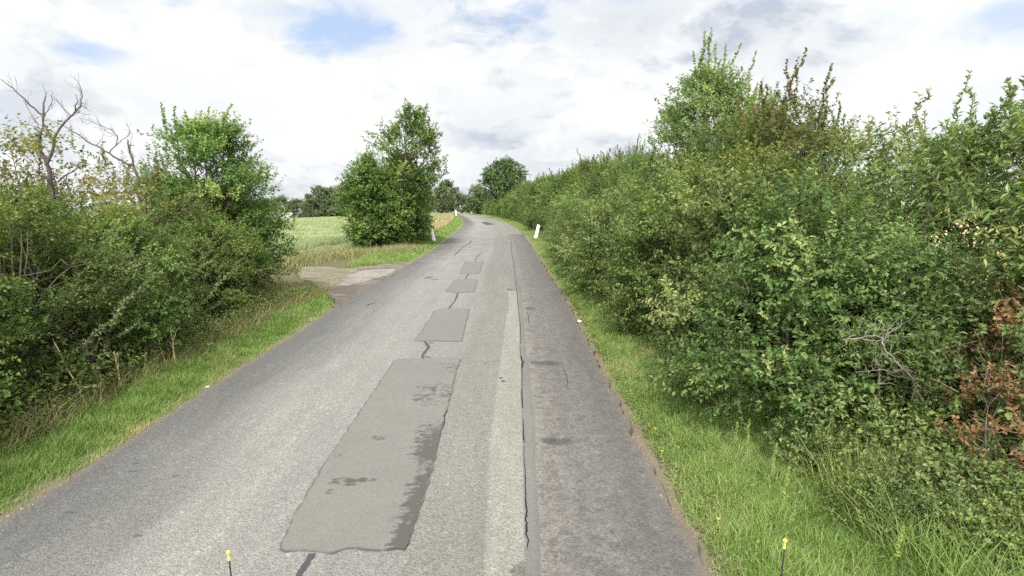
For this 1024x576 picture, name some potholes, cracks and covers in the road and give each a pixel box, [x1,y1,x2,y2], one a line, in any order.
crack [508,236,529,548]
